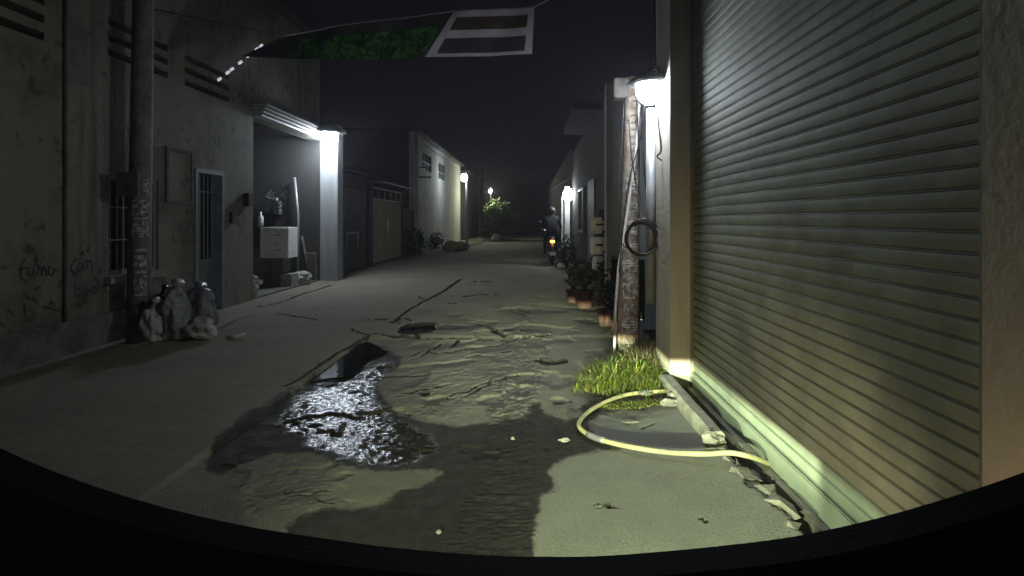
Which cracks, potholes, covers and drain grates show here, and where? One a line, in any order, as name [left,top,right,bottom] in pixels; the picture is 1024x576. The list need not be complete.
pothole [397,322,436,339]
crack [219,279,552,400]
